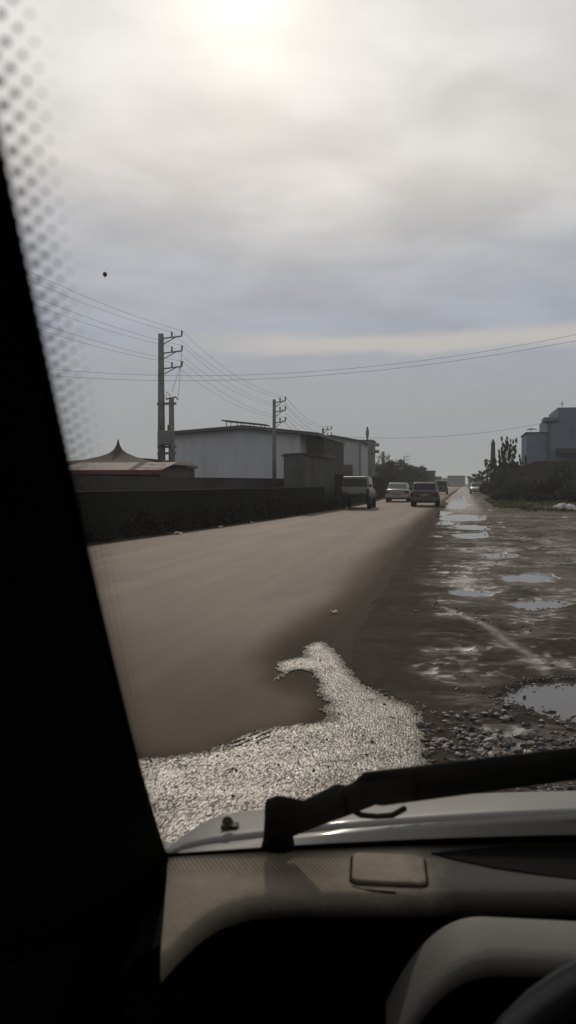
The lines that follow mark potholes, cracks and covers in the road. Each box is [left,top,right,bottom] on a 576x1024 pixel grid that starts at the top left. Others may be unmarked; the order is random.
pothole [474,673,576,728]
